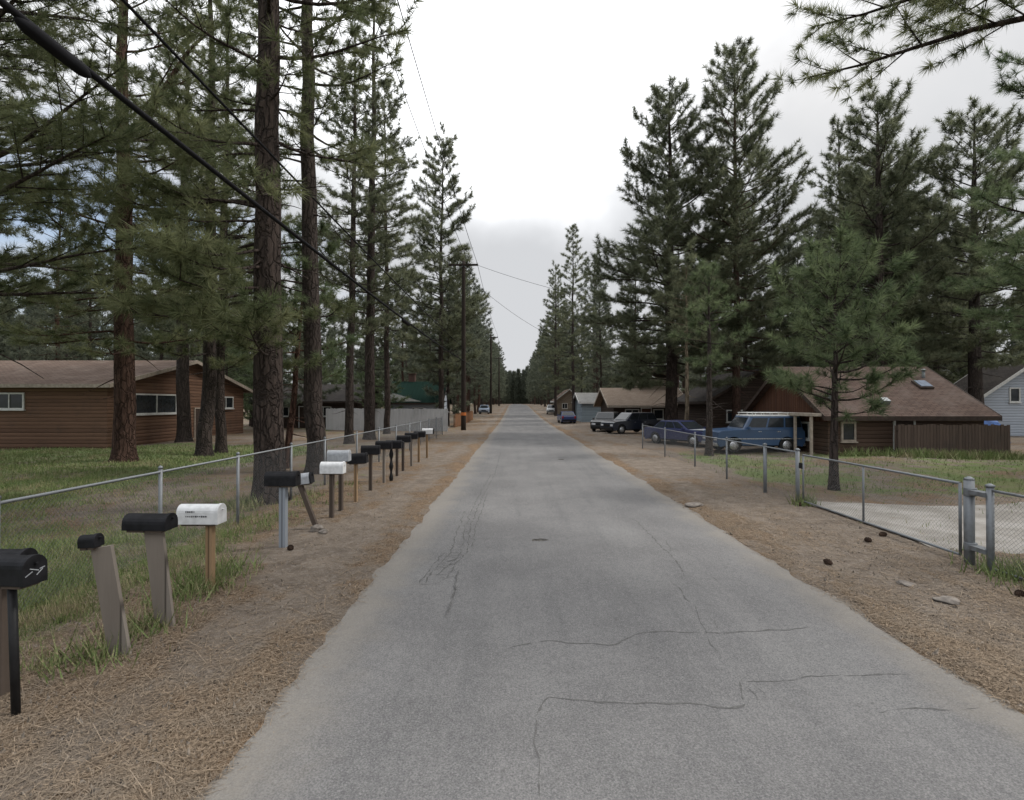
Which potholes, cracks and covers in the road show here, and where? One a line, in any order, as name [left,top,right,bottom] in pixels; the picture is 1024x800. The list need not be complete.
crack [508,517,815,649]
crack [533,673,891,798]
crack [411,454,501,616]
